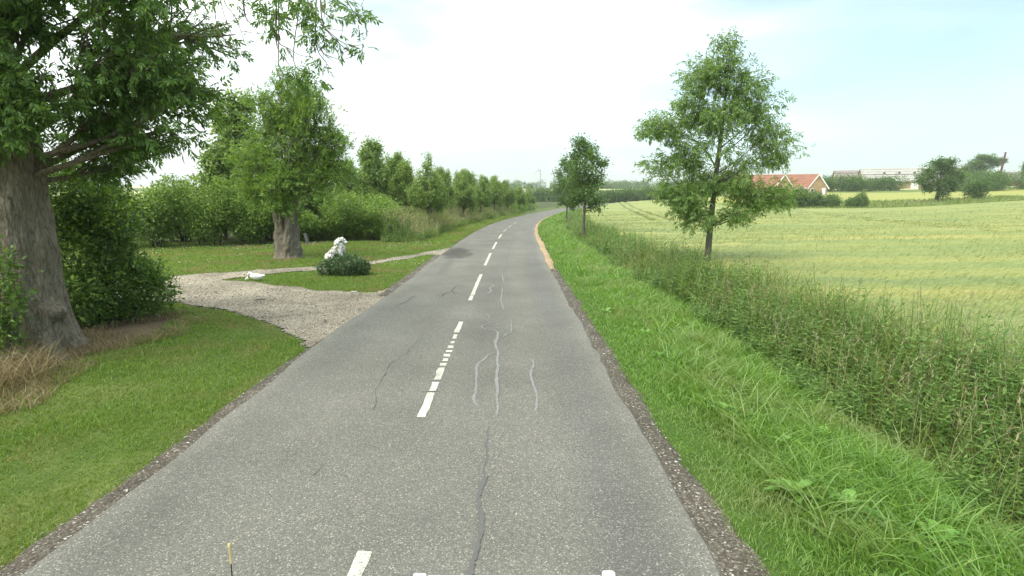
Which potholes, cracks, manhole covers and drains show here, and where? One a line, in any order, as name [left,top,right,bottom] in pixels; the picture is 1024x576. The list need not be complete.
crack [374,297,426,408]
